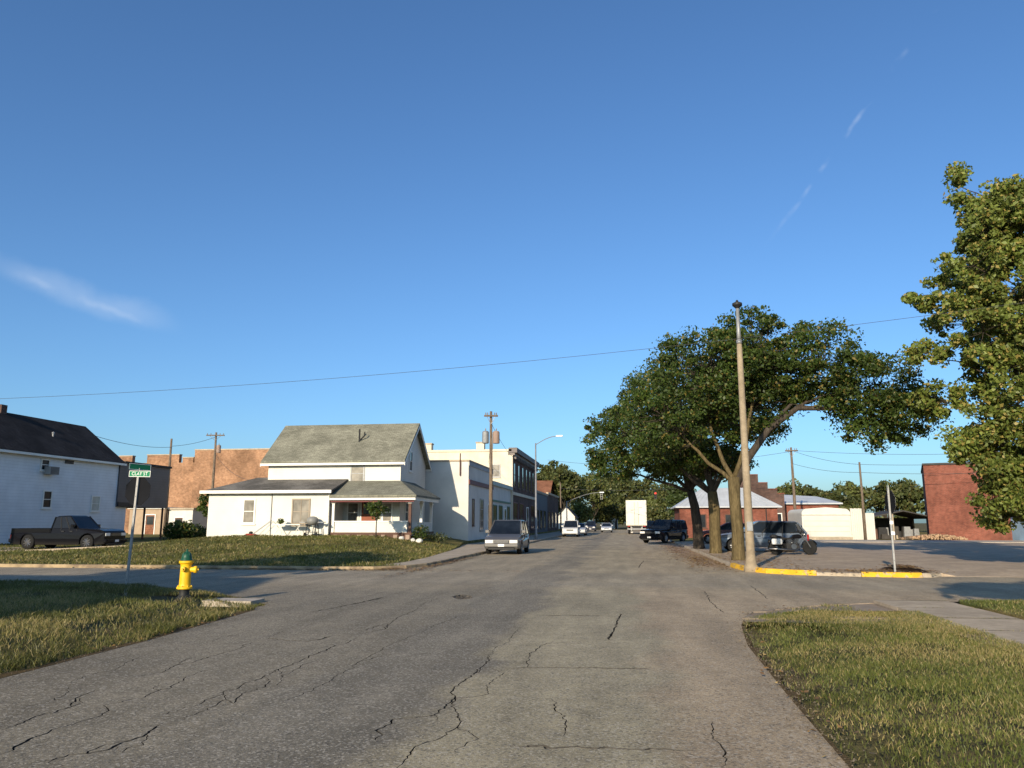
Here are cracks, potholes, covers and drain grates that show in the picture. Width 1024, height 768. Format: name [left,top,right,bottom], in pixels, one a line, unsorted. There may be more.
crack [0,635,251,768]
crack [510,701,728,766]
crack [151,597,432,720]
crack [375,629,518,768]
